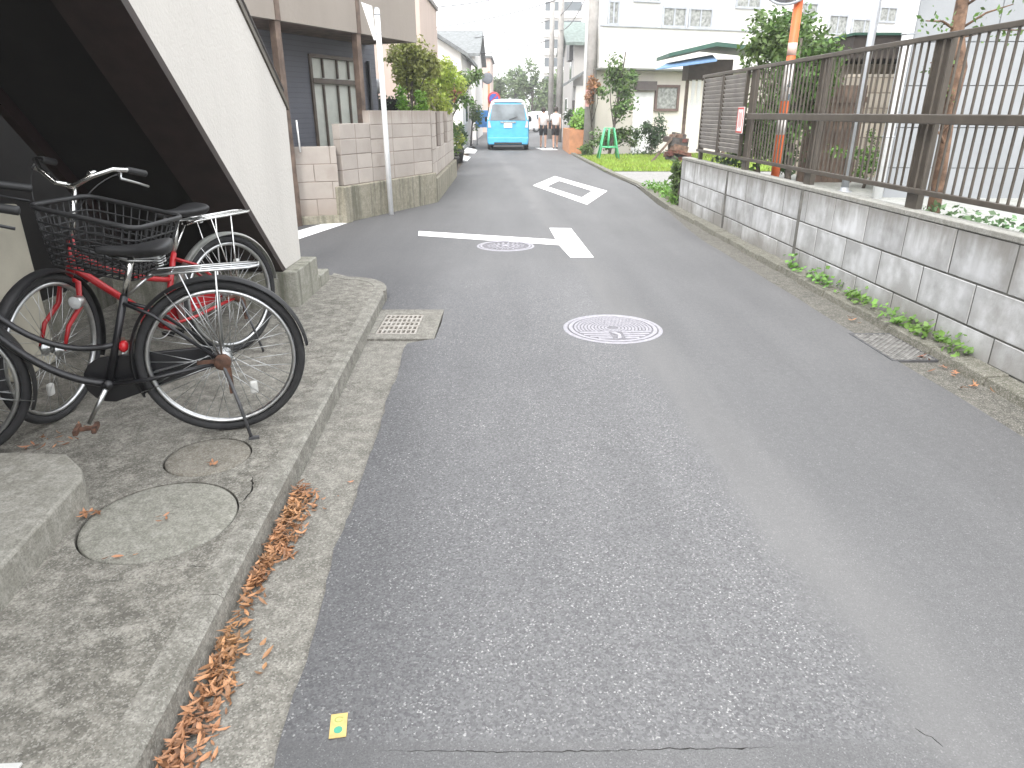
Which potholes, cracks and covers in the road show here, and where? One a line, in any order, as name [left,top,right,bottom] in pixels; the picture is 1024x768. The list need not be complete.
drain grate [849,333,939,363]
manhole cover [76,483,239,565]
manhole cover [163,439,252,477]
manhole cover [563,315,663,344]
drain grate [367,309,444,341]
manhole cover [477,241,534,251]
